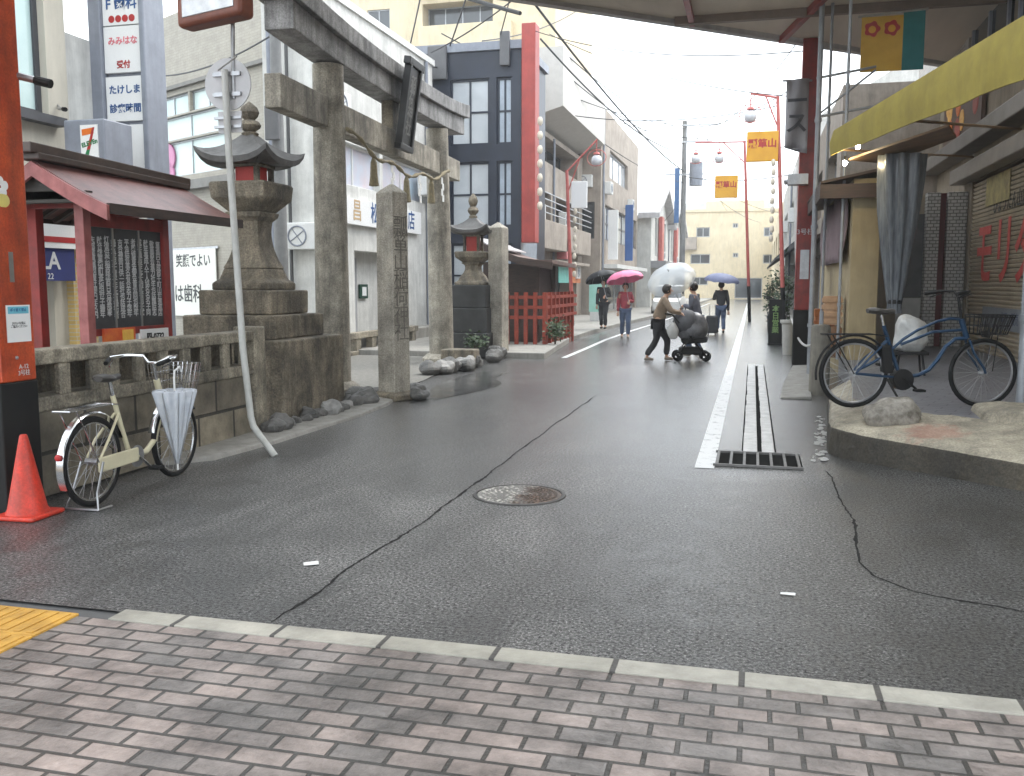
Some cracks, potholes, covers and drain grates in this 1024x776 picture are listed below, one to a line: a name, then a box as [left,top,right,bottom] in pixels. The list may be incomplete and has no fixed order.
manhole cover [473,484,566,506]
drain grate [713,450,804,470]
crack [826,471,1024,612]
